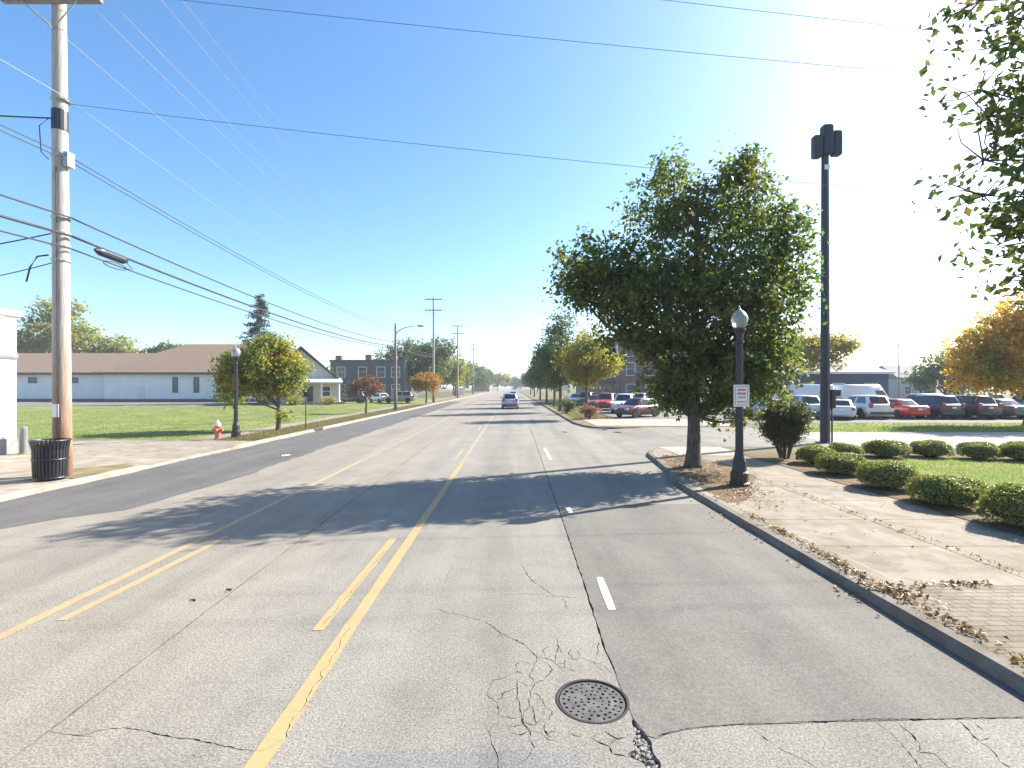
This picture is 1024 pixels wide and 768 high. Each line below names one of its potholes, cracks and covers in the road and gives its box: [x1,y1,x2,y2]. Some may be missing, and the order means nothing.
manhole cover [555,679,630,737]
crack [50,727,253,751]
crack [439,609,611,763]
crack [875,720,1010,768]
crack [571,732,626,757]
pothole [627,719,661,768]
